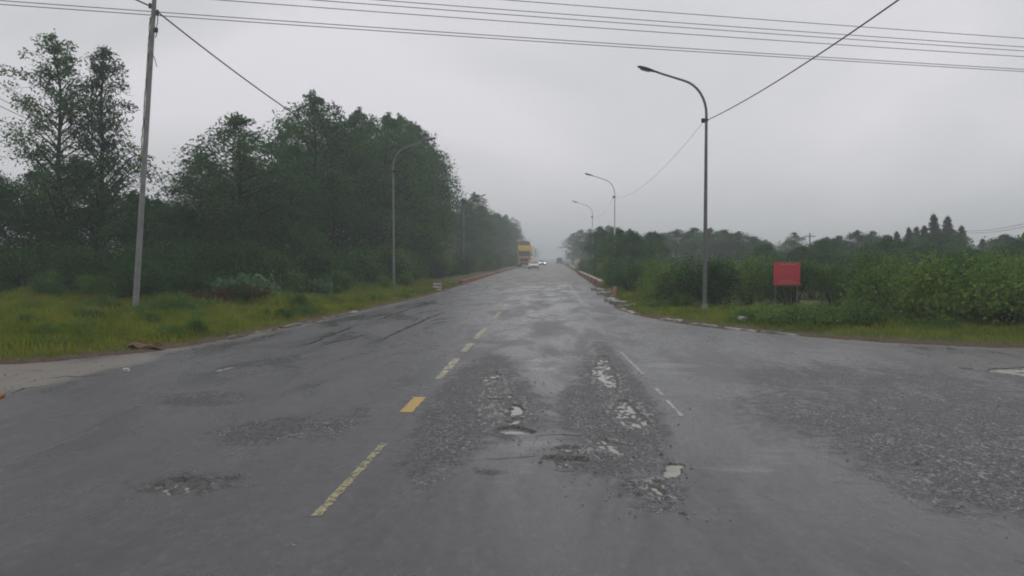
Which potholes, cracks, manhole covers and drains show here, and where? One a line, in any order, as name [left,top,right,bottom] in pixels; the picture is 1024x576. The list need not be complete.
pothole [540,455,590,468]
pothole [611,399,653,429]
pothole [503,404,527,416]
crack [304,308,444,346]
pothole [659,463,686,478]
pothole [491,425,537,435]
pothole [144,476,212,495]
pothole [587,354,620,392]
